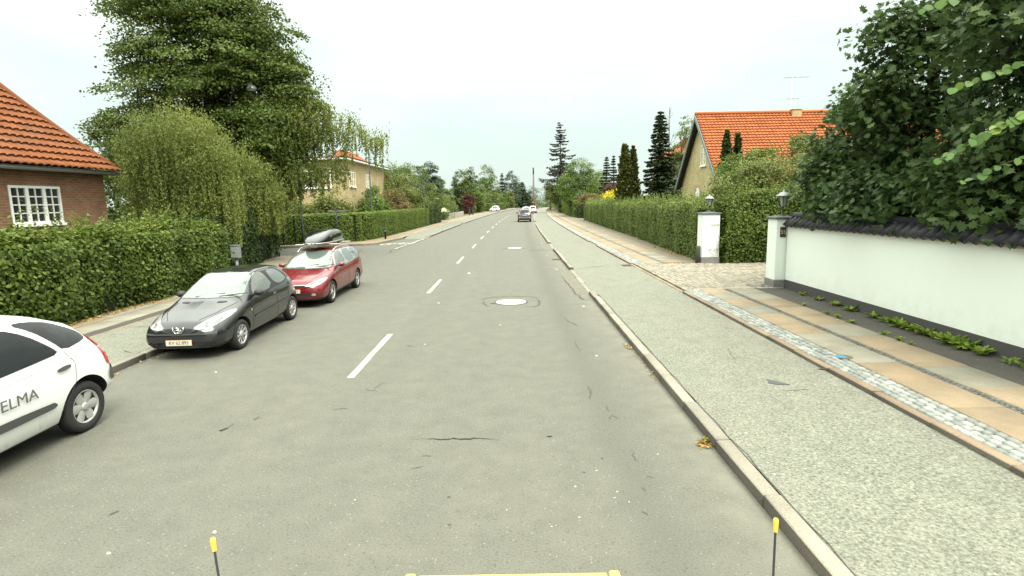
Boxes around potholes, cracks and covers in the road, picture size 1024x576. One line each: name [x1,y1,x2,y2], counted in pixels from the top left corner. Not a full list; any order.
crack [411,437,486,469]
